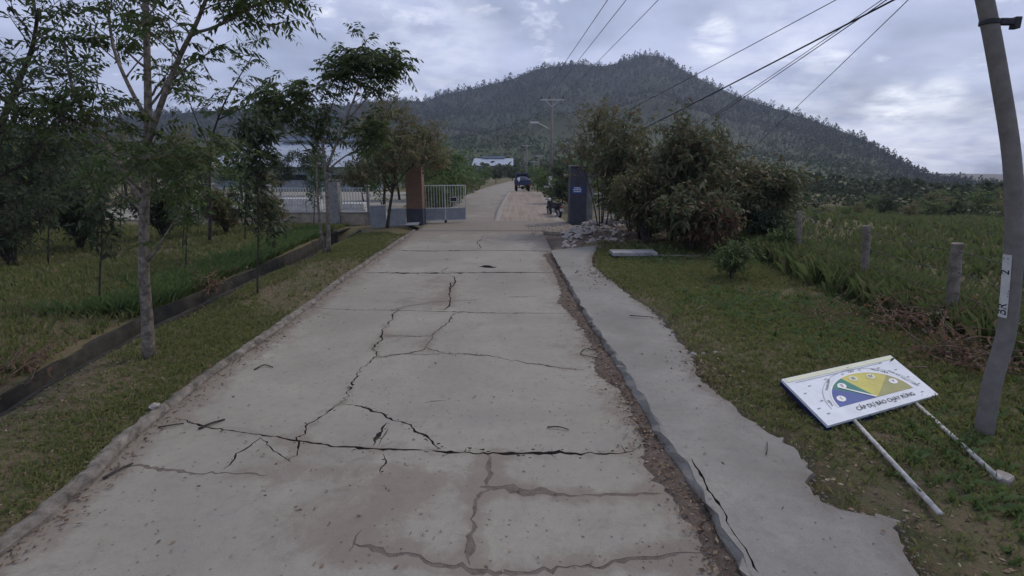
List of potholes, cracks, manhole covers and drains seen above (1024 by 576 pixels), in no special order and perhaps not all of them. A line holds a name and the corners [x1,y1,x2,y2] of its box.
crack [126,268,758,576]
